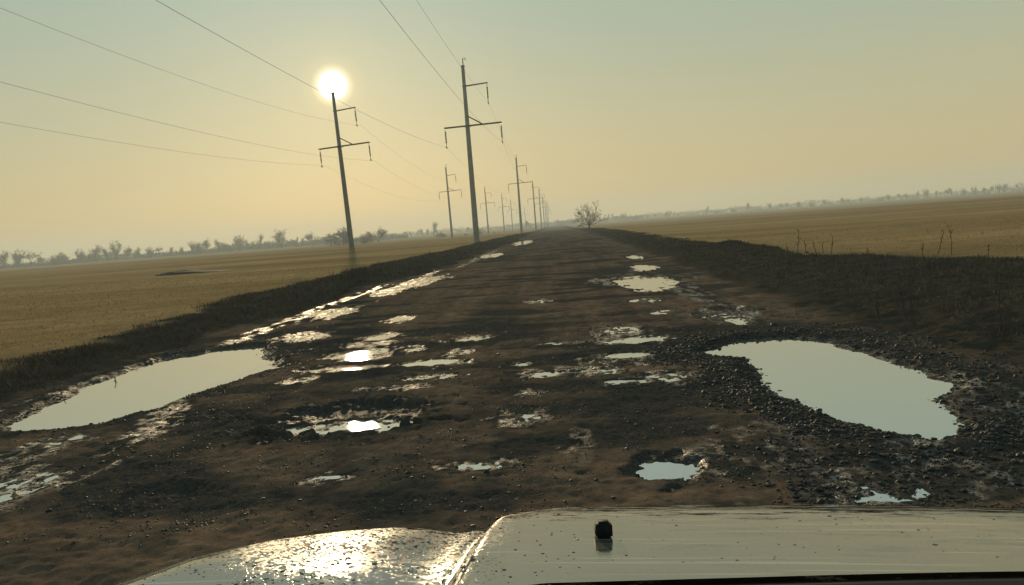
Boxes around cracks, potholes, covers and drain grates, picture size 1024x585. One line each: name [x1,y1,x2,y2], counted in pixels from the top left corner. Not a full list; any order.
pothole [612,273,684,294]
pothole [591,333,692,344]
pothole [240,395,436,445]
pothole [809,481,952,506]
pothole [318,345,404,364]
pothole [618,448,725,493]
pothole [583,324,640,336]
